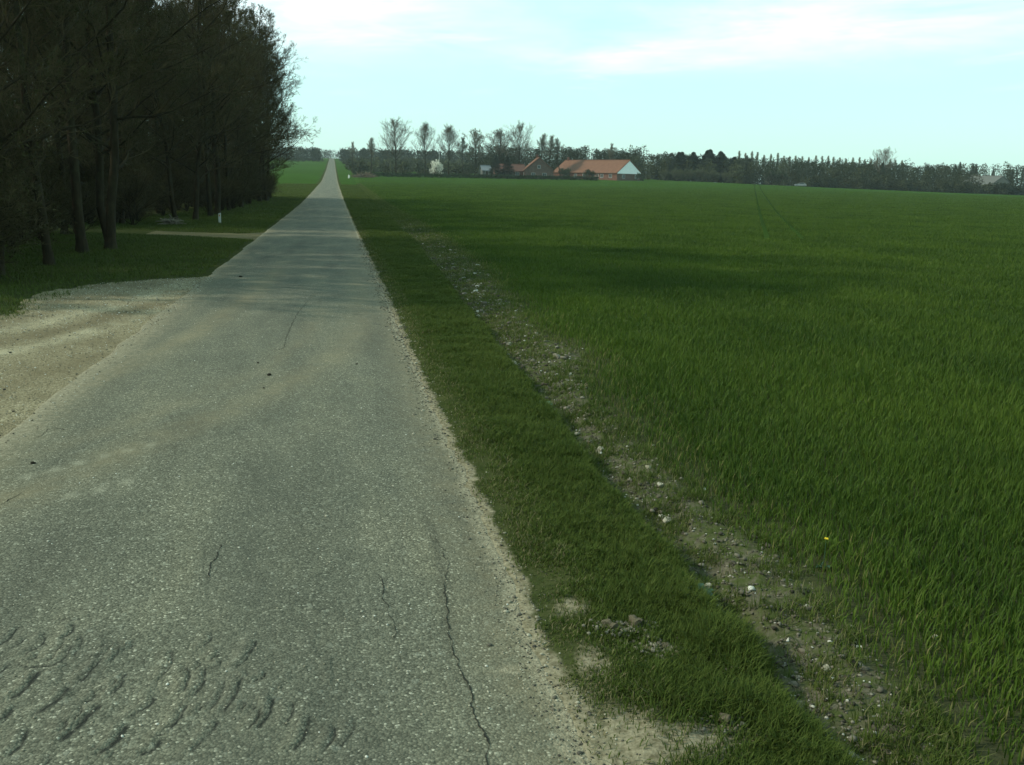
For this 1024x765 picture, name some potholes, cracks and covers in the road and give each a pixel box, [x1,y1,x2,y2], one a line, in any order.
crack [435,536,490,765]
